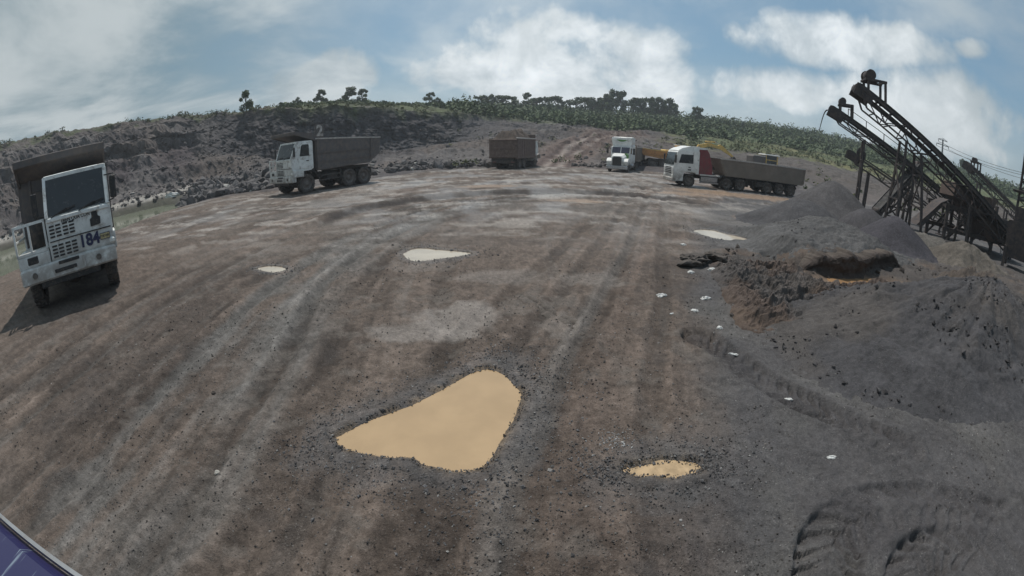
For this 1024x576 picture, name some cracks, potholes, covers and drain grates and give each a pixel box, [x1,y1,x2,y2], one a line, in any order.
pothole [687,228,746,241]
pothole [395,246,480,263]
pothole [603,445,720,492]
pothole [314,359,542,487]
pothole [251,264,293,274]
